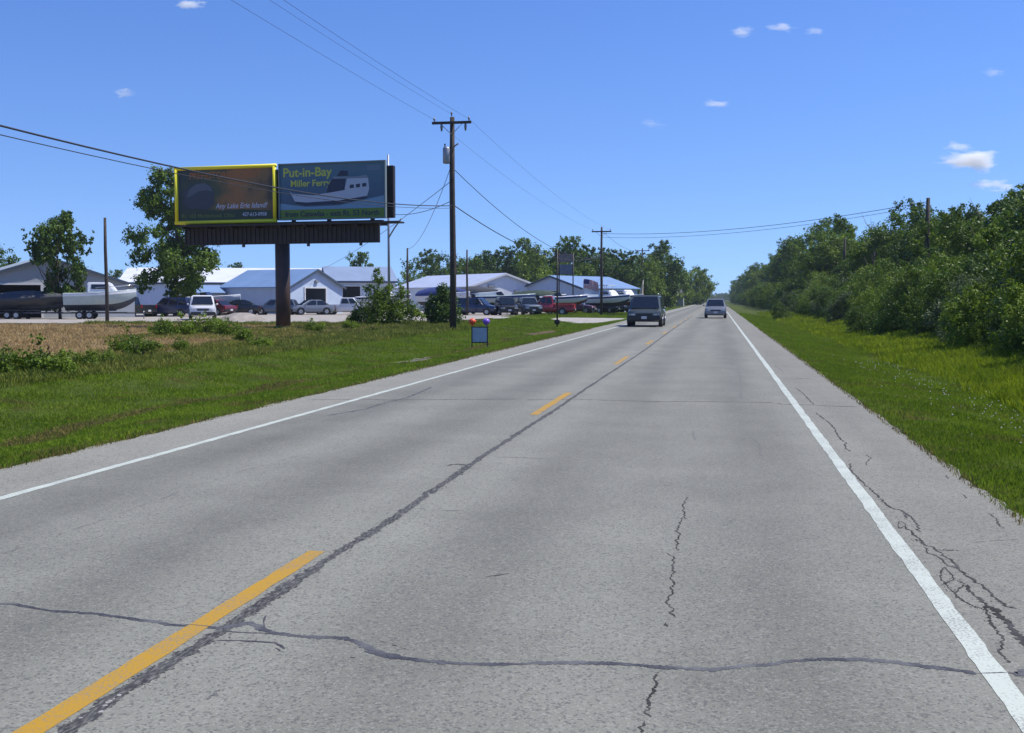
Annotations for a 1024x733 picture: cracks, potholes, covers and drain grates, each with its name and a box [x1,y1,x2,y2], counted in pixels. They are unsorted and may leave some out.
crack [638,485,688,732]
crack [775,366,1024,663]
